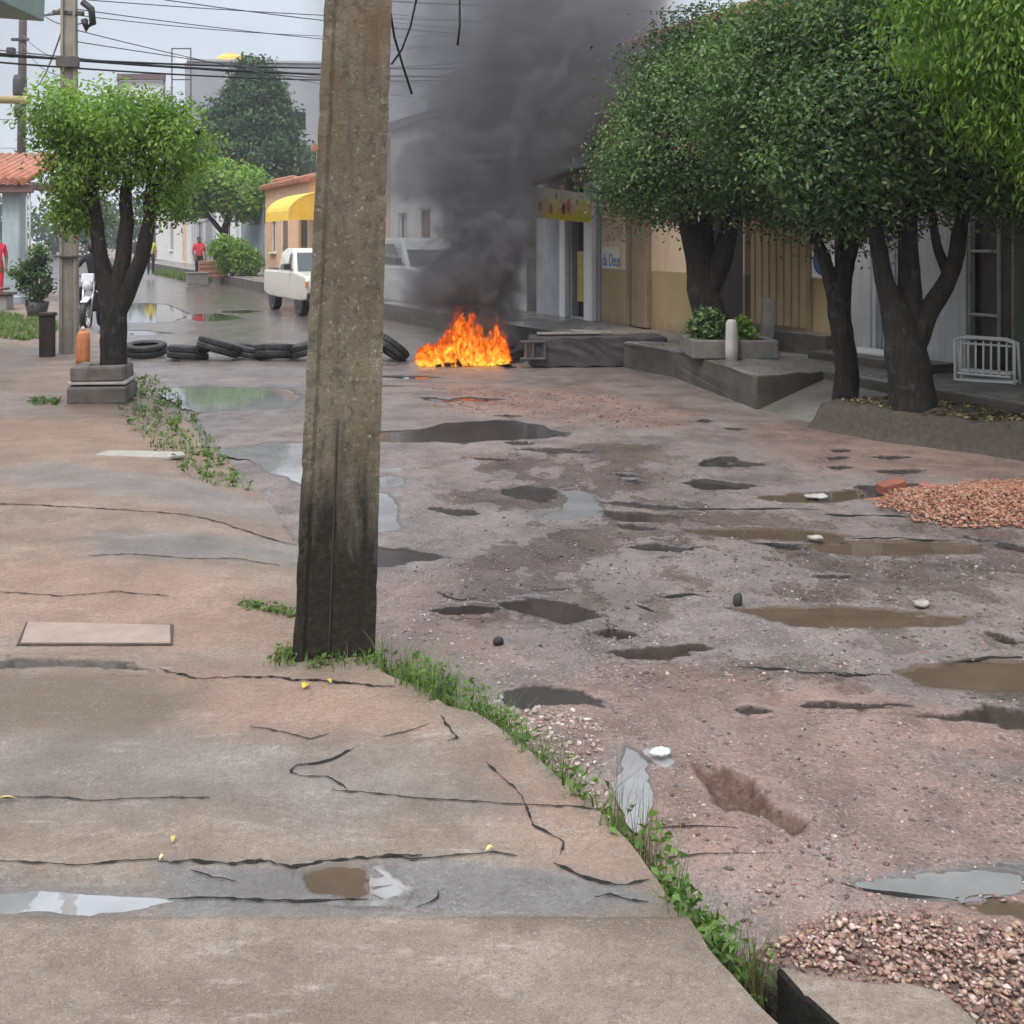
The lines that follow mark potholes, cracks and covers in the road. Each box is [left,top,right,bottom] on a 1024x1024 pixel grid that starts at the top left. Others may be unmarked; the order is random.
pothole [177,313,260,322]
crack [89,553,280,566]
pothole [878,656,1024,698]
pothole [486,682,612,715]
pothole [884,701,1024,739]
pothole [491,596,613,630]
pothole [714,604,998,632]
crack [736,666,890,676]
pothole [92,303,245,325]
pothole [686,456,773,469]
crack [159,668,390,686]
manhole cover [16,621,174,646]
